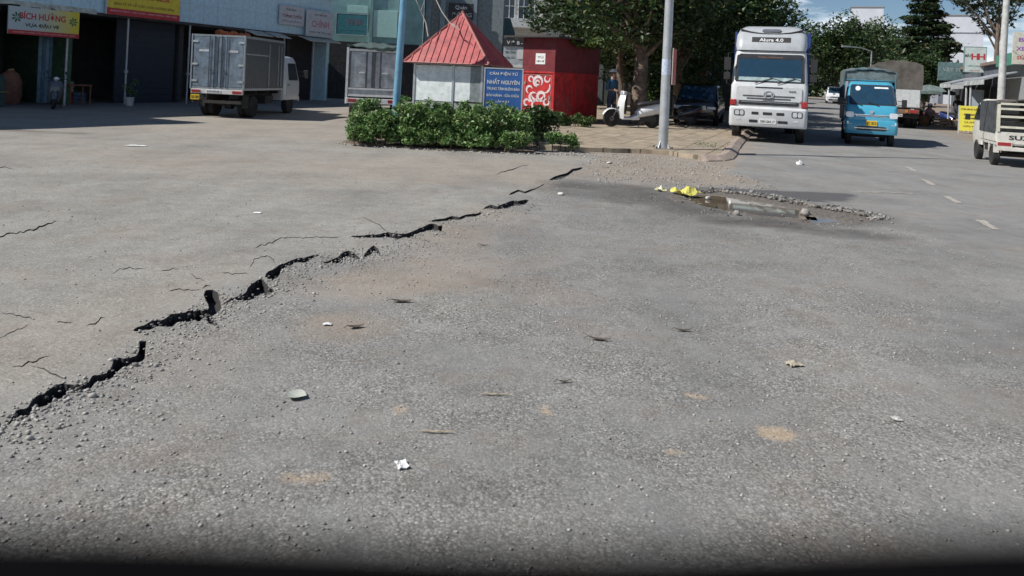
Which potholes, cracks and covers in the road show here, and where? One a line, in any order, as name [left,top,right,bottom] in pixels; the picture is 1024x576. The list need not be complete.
pothole [638,186,894,231]
crack [0,165,582,425]
